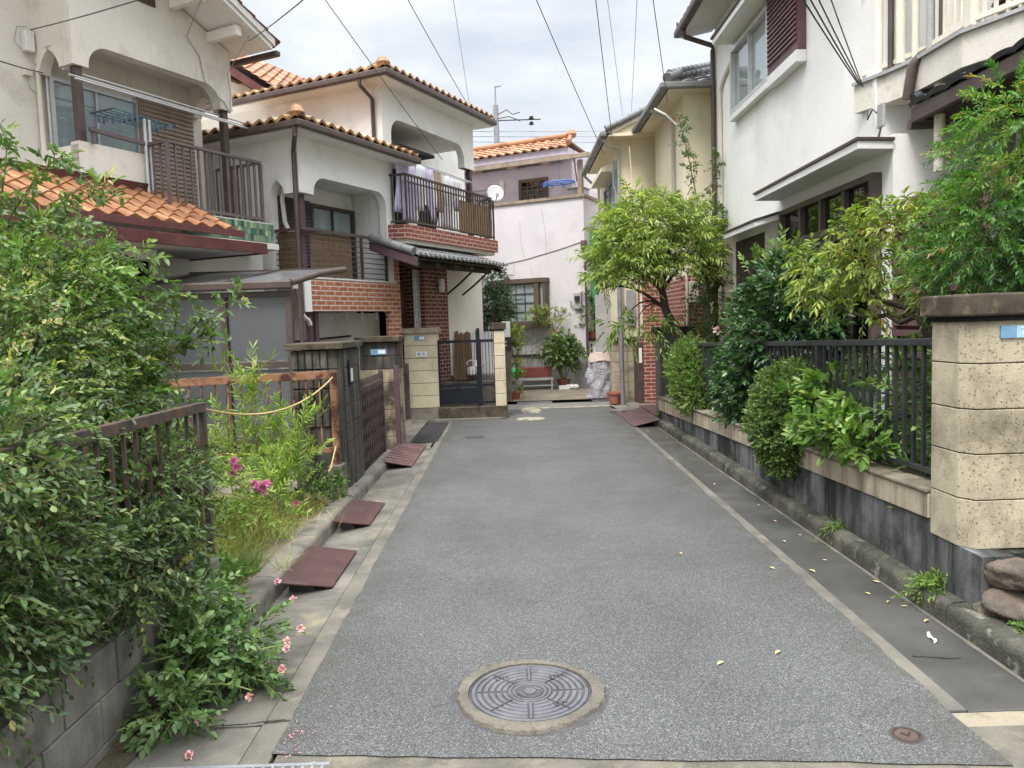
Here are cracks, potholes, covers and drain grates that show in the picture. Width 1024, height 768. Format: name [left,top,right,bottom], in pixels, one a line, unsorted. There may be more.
manhole cover [451,659,609,736]
drain grate [412,422,449,443]
utility cover [888,726,926,744]
